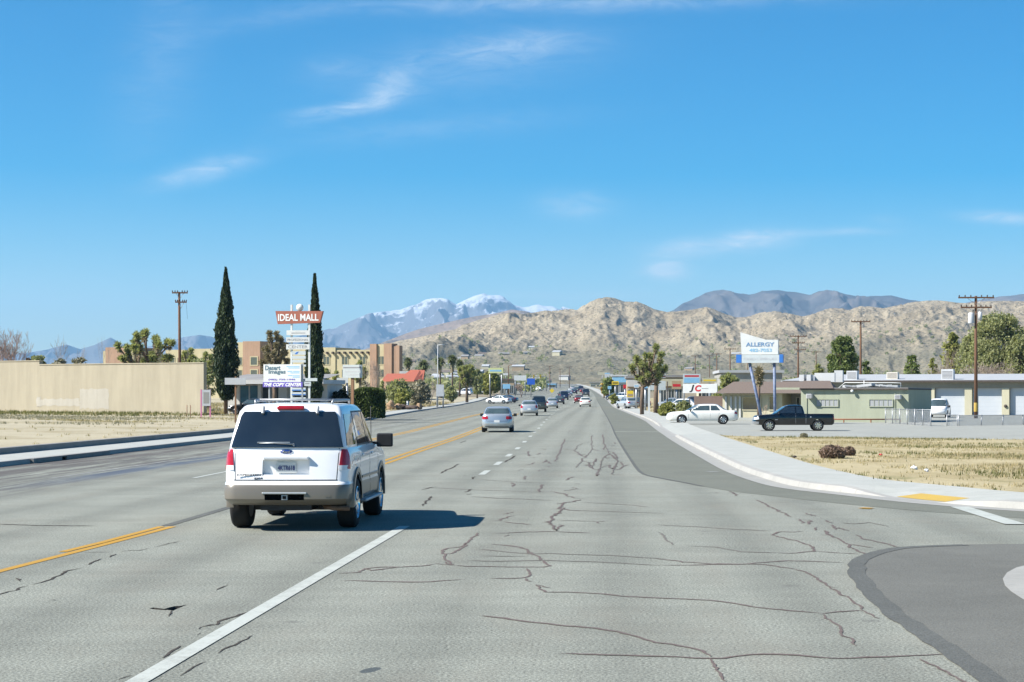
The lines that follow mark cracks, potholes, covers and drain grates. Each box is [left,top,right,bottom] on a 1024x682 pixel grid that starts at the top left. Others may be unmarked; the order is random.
crack [799,513,886,536]
crack [119,612,252,679]
crack [482,584,967,682]
crack [473,434,765,565]
crack [0,541,178,594]
